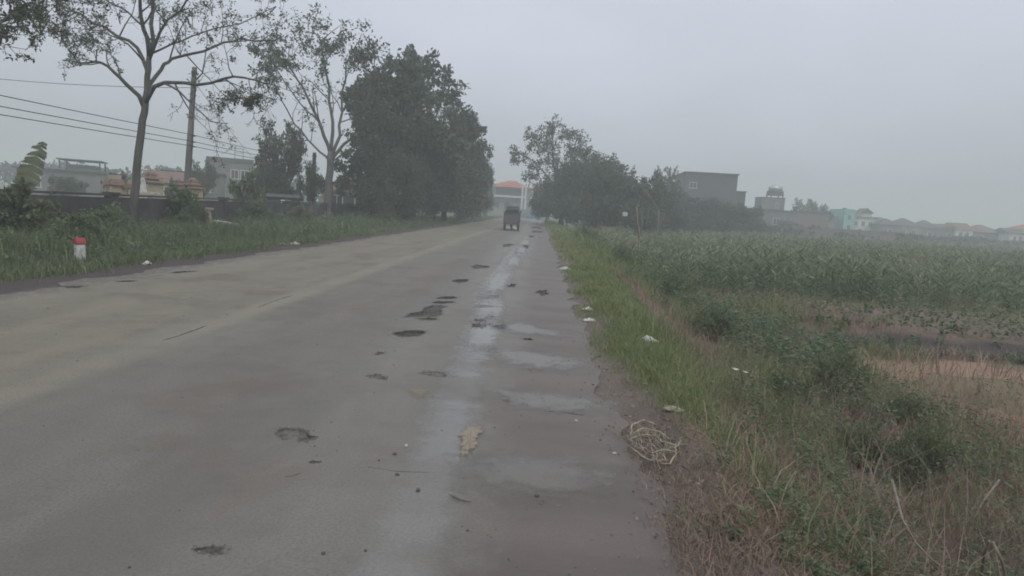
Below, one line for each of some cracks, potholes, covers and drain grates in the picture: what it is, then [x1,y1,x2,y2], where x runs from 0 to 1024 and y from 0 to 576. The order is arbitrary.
pothole [191,545,224,555]
pothole [404,304,448,317]
pothole [275,427,318,442]
